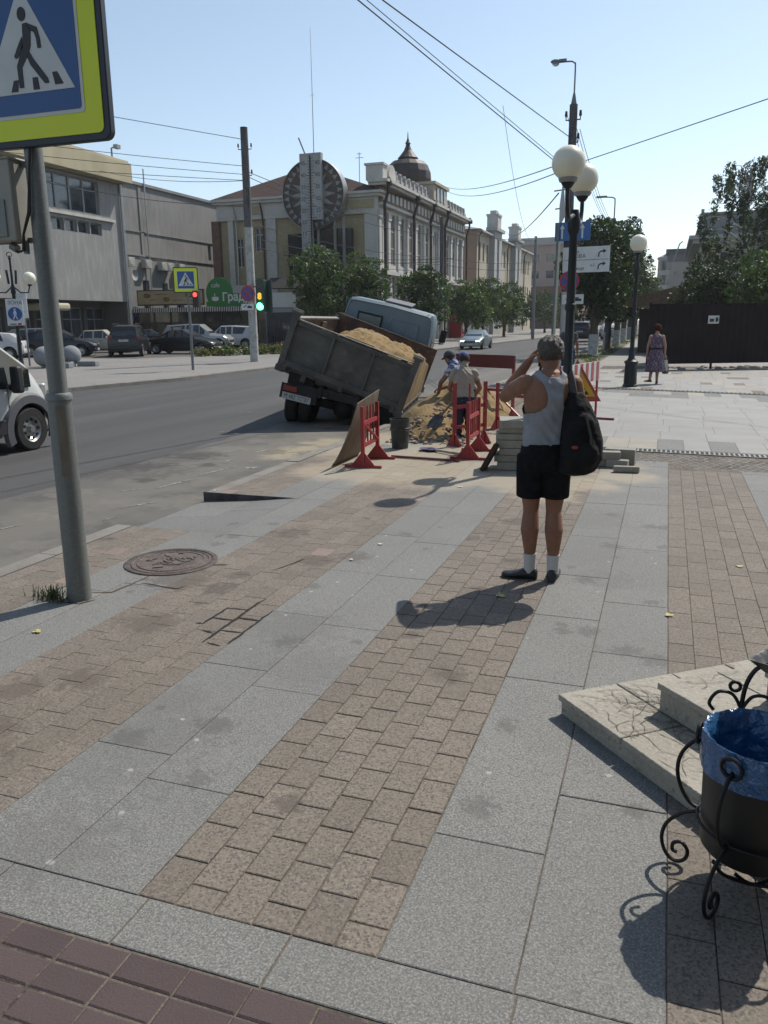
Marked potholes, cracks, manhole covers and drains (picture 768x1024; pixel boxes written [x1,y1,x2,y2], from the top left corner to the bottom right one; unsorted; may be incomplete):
manhole cover [124,548,218,576]
drain grate [603,446,768,458]
